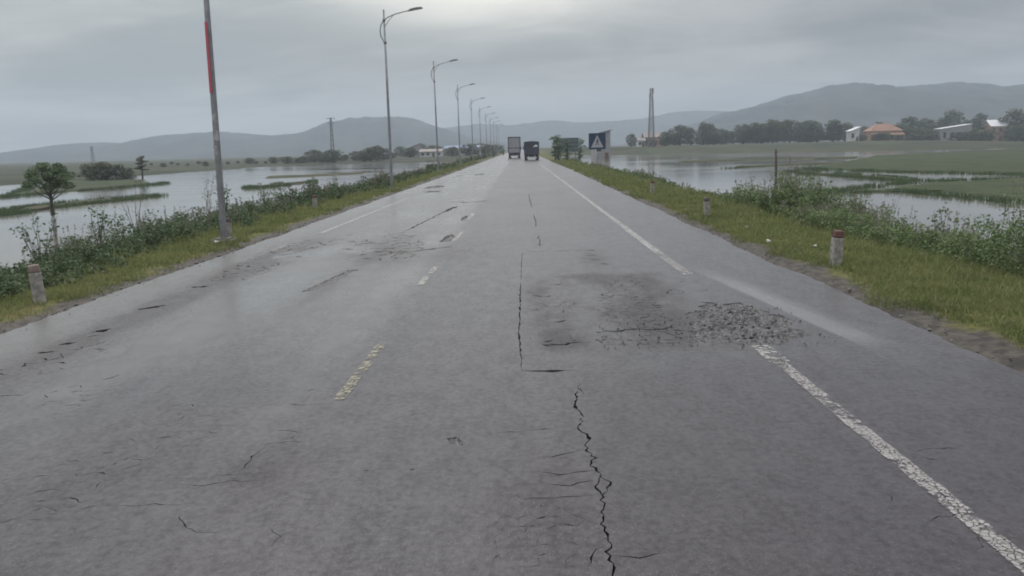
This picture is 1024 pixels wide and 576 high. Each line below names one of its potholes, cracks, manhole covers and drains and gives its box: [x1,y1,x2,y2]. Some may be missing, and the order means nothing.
crack [0,328,119,378]
crack [123,503,281,546]
crack [190,430,305,486]
crack [4,376,115,406]
crack [492,385,659,576]
crack [1,404,222,523]
crack [191,233,452,288]
pothole [684,302,812,347]
crack [528,276,703,346]
